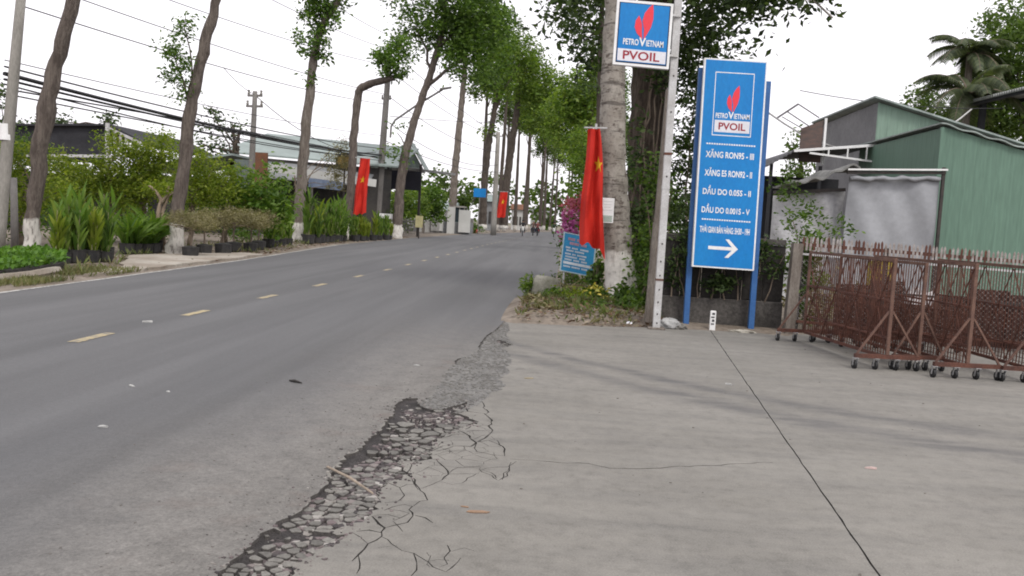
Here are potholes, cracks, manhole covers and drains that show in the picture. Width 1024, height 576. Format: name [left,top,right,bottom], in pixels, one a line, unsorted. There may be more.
pothole [326,397,489,473]
crack [352,402,773,576]
pothole [251,460,432,536]
